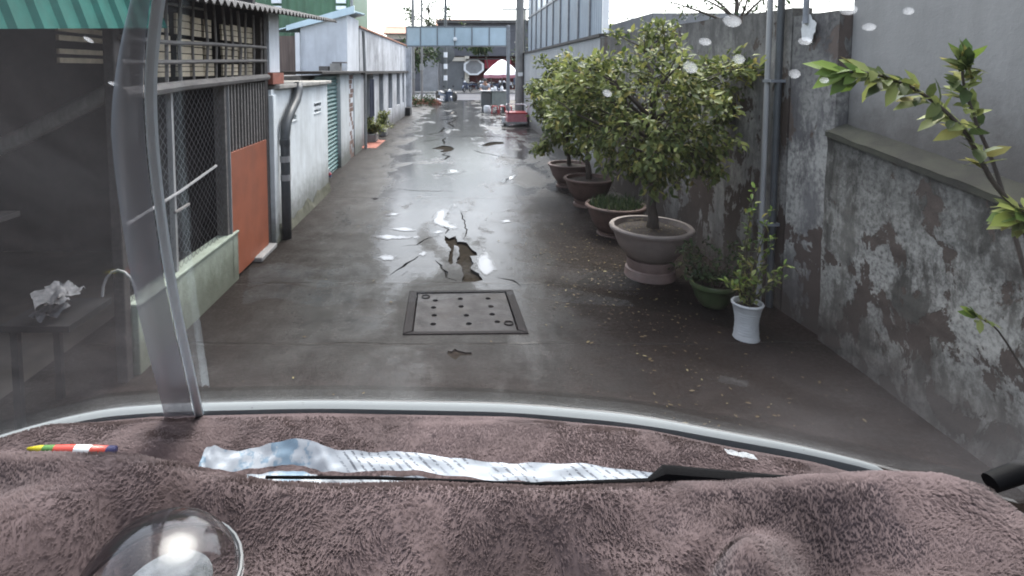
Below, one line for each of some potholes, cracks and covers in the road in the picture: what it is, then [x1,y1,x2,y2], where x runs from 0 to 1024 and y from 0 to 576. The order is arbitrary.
manhole cover [403,290,529,335]
pothole [445,236,483,282]
crack [409,111,519,161]
crack [390,213,468,281]
pothole [447,349,472,360]
